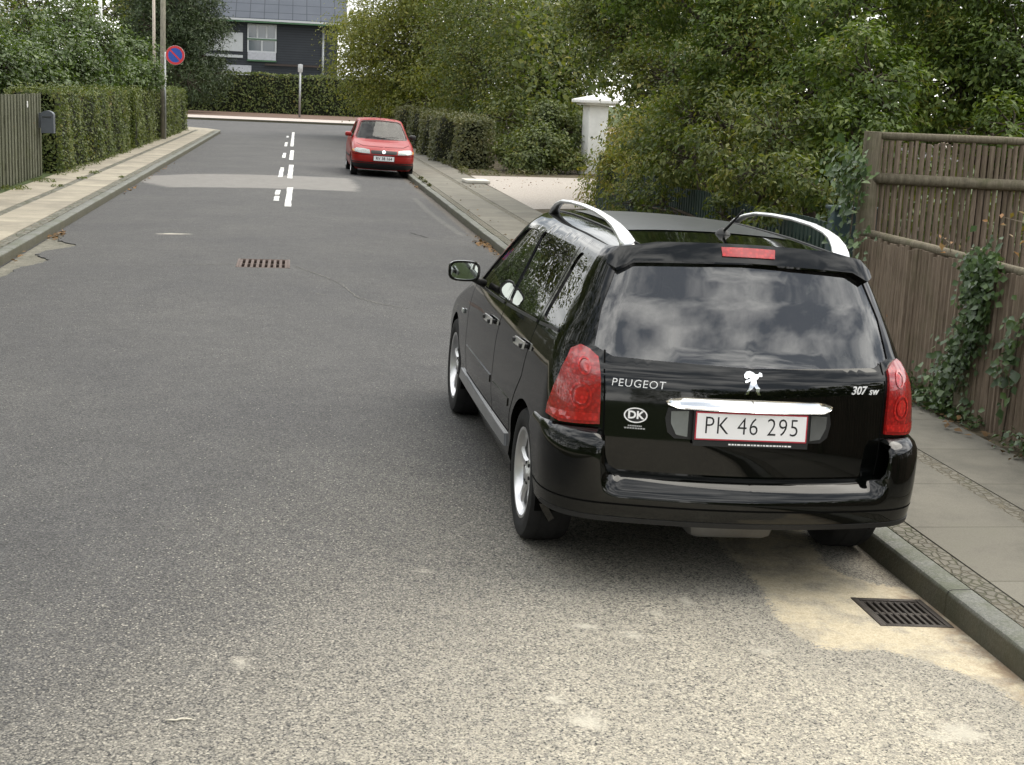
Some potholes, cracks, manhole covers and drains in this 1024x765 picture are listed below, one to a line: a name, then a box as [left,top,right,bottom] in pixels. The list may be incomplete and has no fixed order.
drain grate [236,258,290,268]
drain grate [851,597,954,628]
